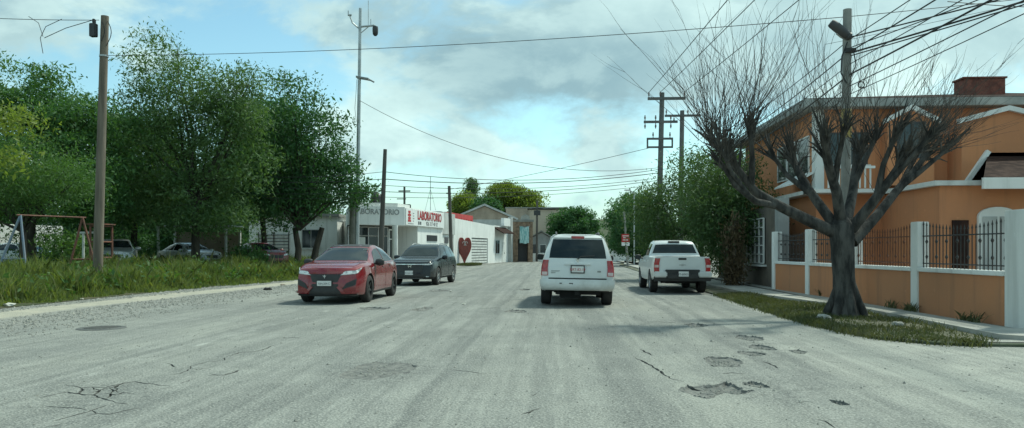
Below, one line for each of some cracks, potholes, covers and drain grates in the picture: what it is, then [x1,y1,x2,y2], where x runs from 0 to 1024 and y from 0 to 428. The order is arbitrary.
pothole [703,356,743,367]
pothole [678,381,755,399]
crack [35,345,274,427]
crack [636,349,684,382]
